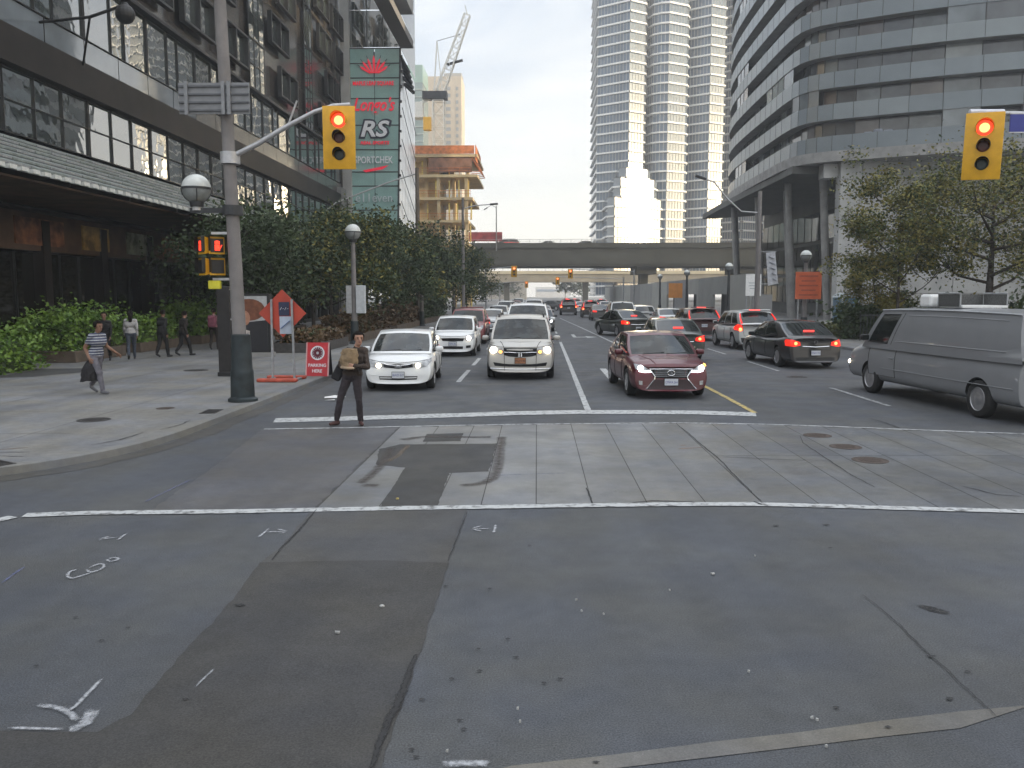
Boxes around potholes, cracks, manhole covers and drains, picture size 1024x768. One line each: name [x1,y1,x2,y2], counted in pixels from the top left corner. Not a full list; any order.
crack [864,595,994,713]
